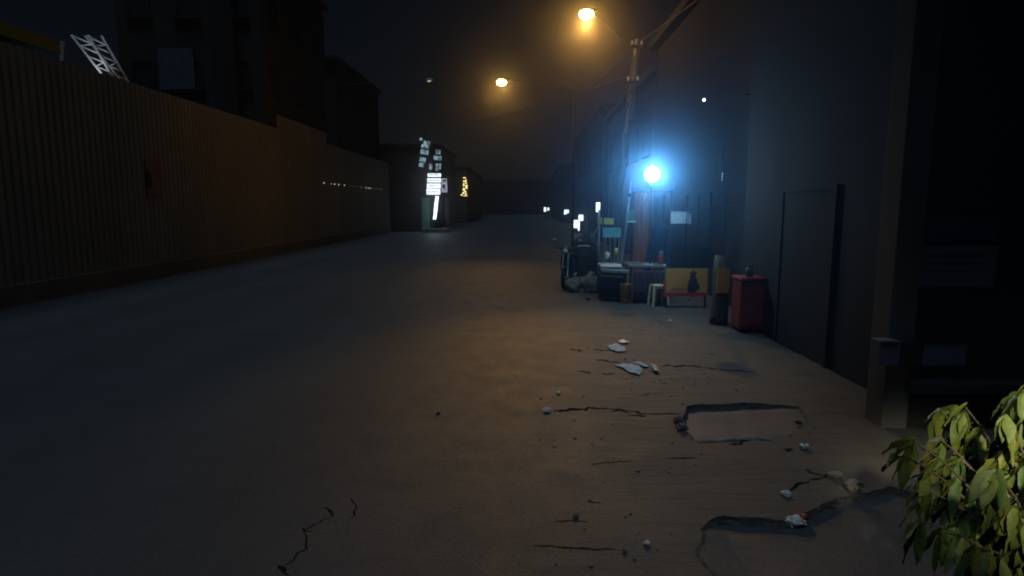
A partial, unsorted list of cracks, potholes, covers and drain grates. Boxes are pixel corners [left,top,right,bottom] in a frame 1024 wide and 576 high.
pothole [683,402,809,441]
crack [591,457,695,465]
pothole [695,486,963,576]
crack [278,498,358,575]
crack [570,344,755,375]
crack [552,407,677,417]
crack [788,468,827,491]
